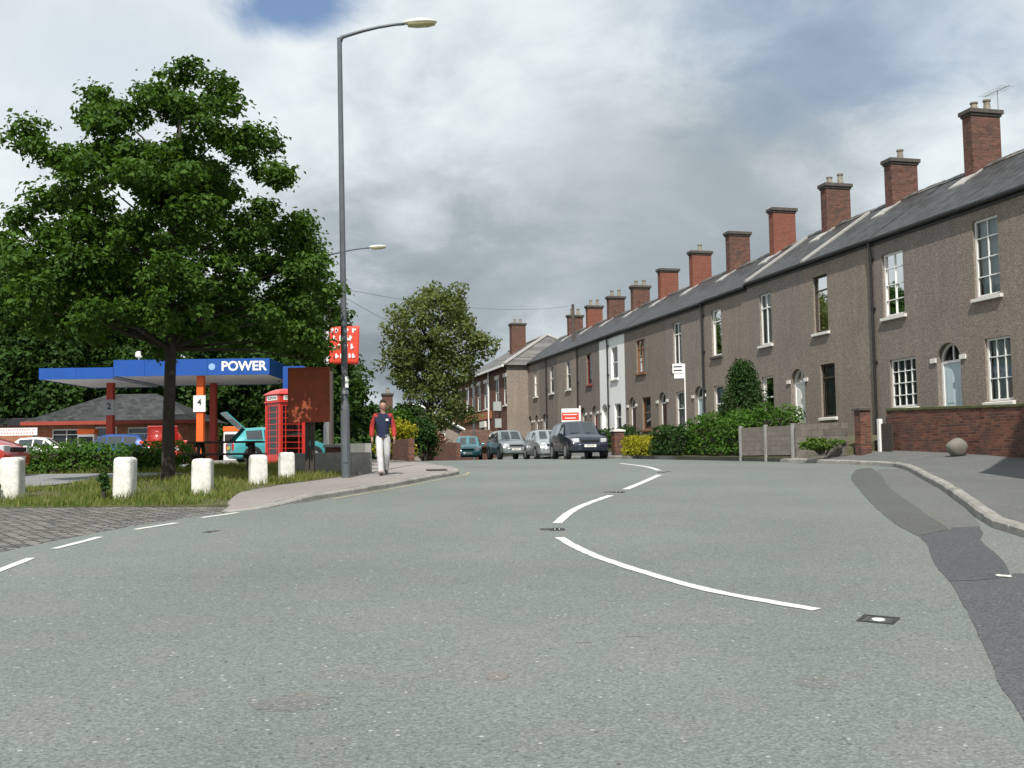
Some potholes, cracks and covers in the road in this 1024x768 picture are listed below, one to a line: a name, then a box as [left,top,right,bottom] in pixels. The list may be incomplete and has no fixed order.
manhole cover [856,614,900,625]
